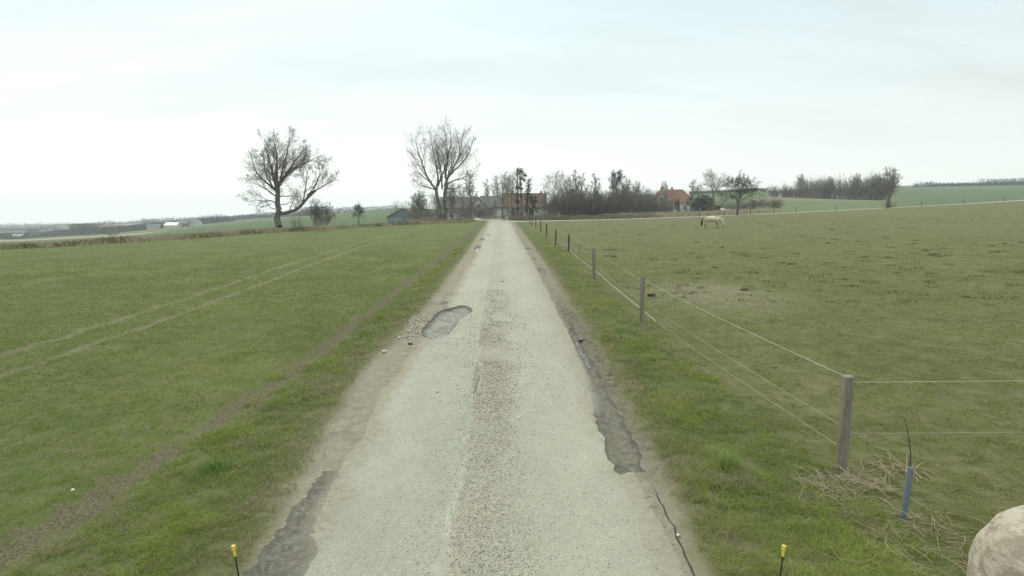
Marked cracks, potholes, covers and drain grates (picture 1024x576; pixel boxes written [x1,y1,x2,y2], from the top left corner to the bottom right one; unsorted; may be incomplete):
pothole [241,471,340,576]
crack [644,479,696,576]
pothole [568,326,645,475]
pothole [421,306,473,339]
